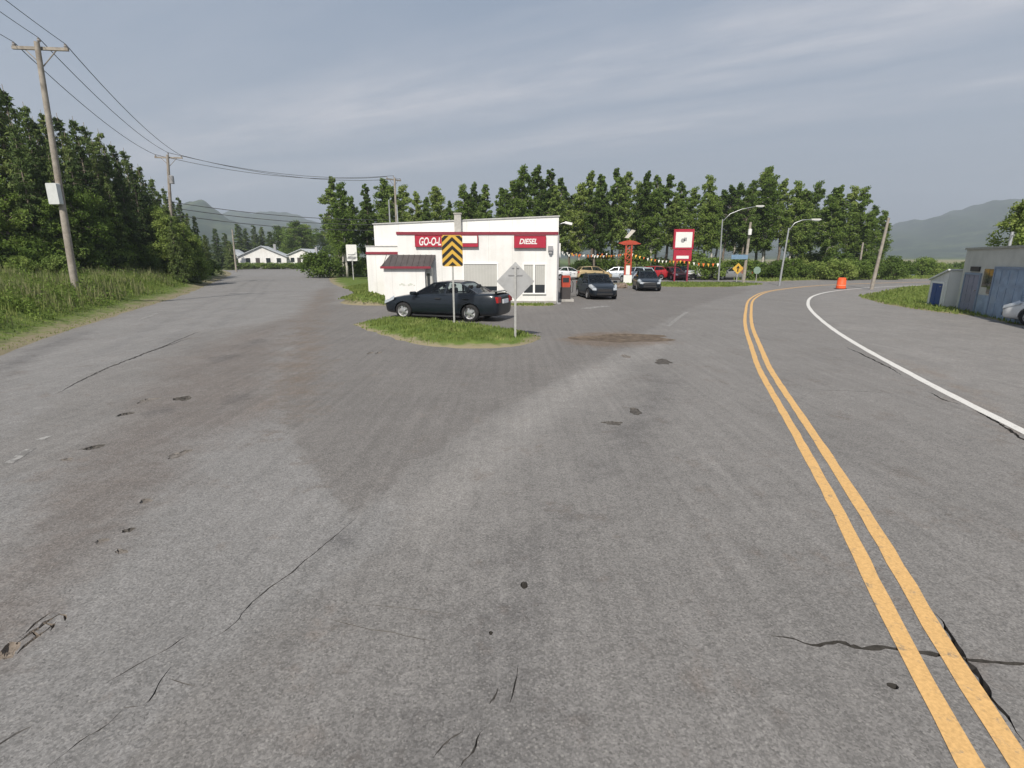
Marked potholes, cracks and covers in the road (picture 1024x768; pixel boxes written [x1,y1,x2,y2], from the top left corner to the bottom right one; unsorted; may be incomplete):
crack [978,412,1024,440]
crack [60,334,193,392]
crack [48,526,347,767]
crack [489,668,518,704]
crack [434,731,482,765]
crack [776,616,1024,741]
crack [0,726,31,744]
